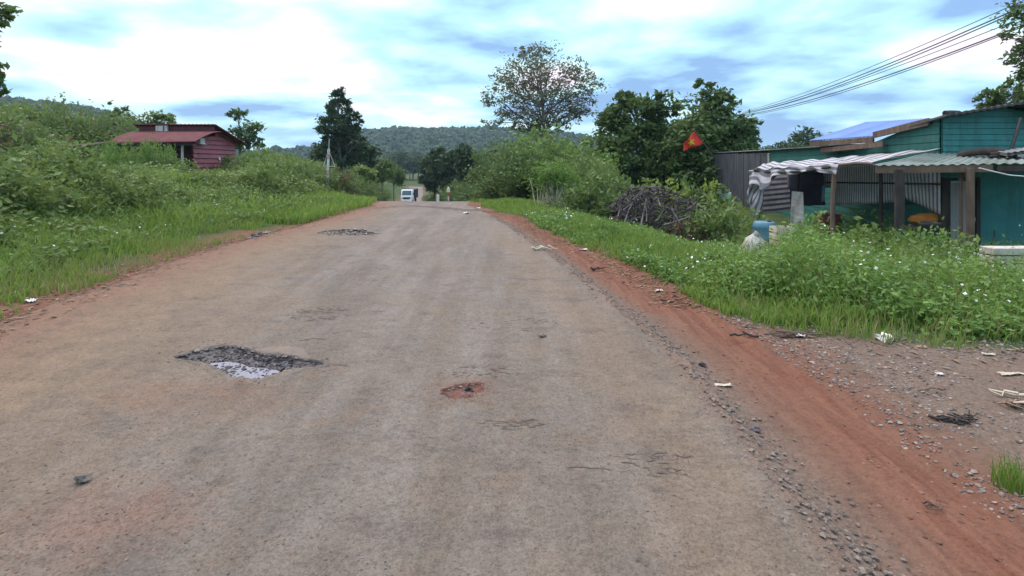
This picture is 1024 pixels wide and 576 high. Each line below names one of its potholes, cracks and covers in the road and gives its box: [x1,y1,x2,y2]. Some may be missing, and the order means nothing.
pothole [312,228,383,237]
crack [567,451,705,477]
pothole [149,340,356,388]
pothole [431,380,493,404]
crack [478,419,544,430]
